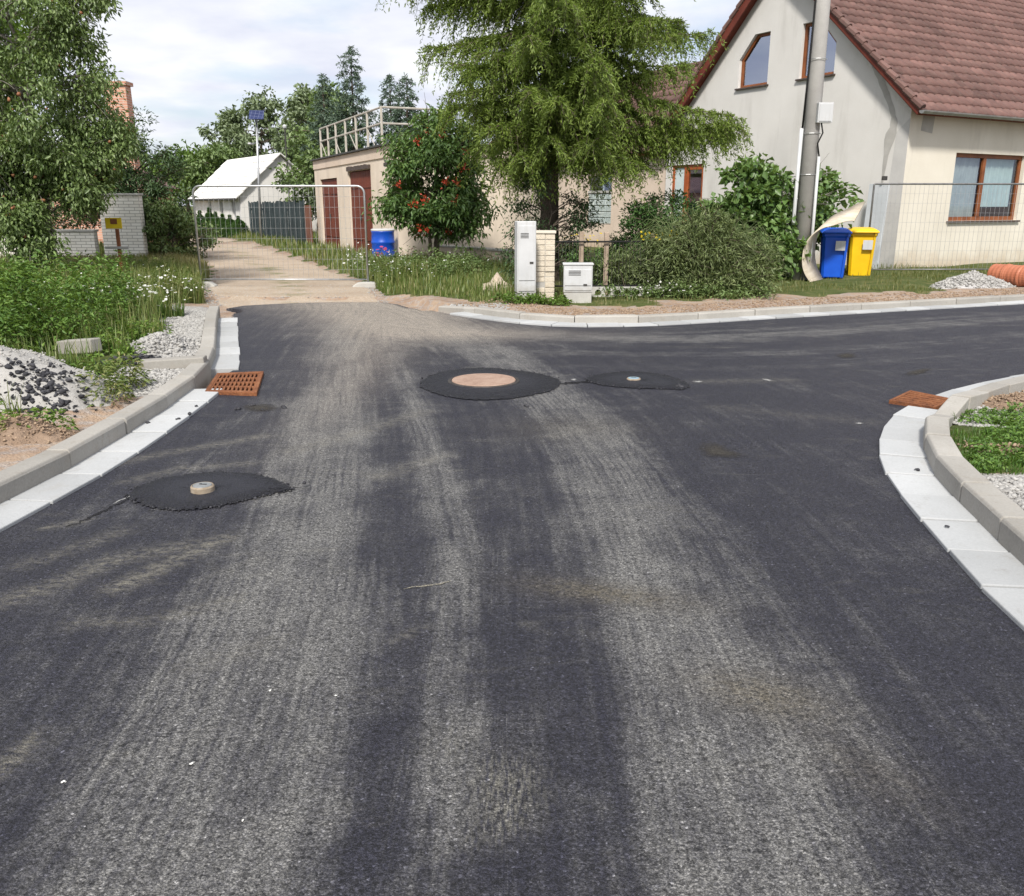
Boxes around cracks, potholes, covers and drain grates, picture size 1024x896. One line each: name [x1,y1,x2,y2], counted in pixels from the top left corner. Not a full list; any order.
utility cover [190,482,215,494]
manhole cover [448,373,520,388]
crack [66,499,128,527]
drain grate [205,371,264,396]
drain grate [889,390,948,410]
